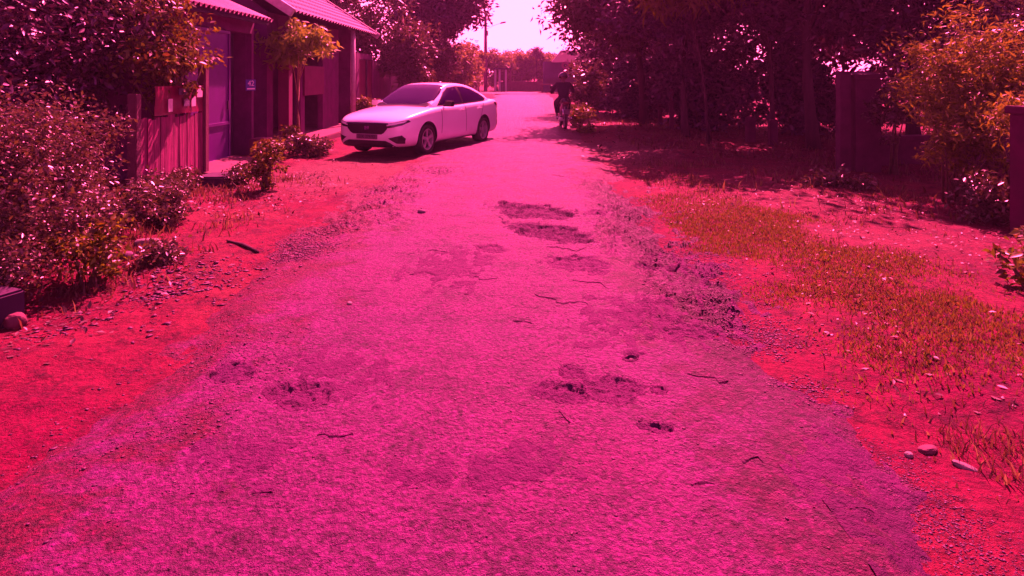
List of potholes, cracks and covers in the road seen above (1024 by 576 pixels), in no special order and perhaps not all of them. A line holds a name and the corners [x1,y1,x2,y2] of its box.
pothole [575,374,647,407]
pothole [637,422,675,433]
pothole [502,221,611,245]
pothole [205,360,256,384]
pothole [527,379,600,405]
pothole [262,379,340,412]
pothole [483,201,586,221]
pothole [650,385,669,395]
crack [535,280,609,305]
